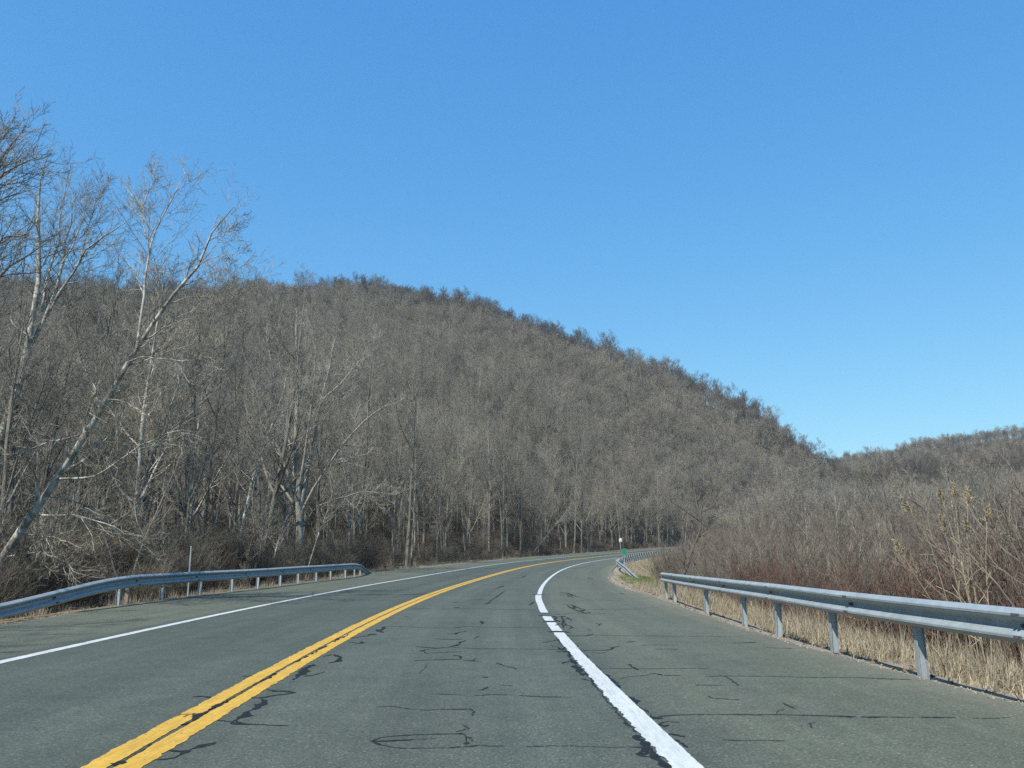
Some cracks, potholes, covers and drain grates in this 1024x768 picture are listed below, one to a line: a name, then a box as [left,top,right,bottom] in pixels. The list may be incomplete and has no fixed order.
crack [381,565,1010,728]
crack [258,664,325,698]
crack [351,627,386,644]
crack [155,742,217,760]
